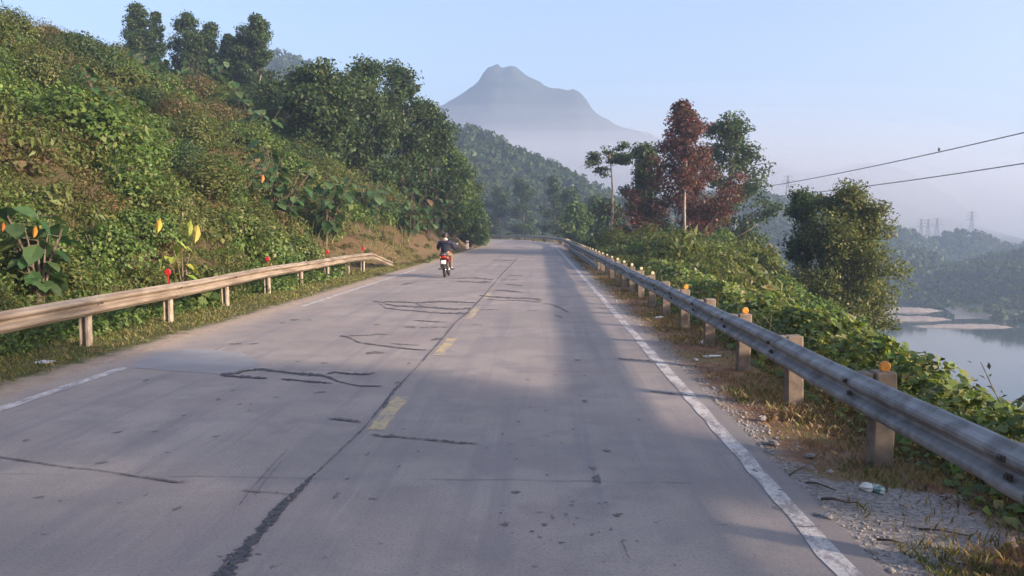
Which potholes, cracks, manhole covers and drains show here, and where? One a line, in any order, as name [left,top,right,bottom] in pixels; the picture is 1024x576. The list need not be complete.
crack [224,371,372,384]
crack [329,418,472,443]
crack [340,303,442,350]
